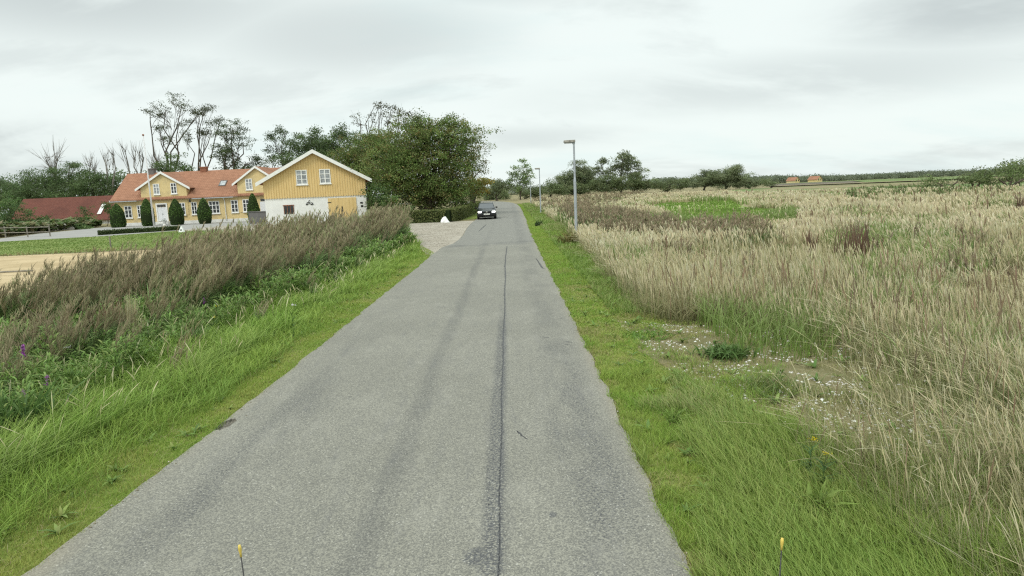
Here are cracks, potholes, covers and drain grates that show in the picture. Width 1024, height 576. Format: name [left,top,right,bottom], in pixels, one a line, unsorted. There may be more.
crack [480,249,527,576]
